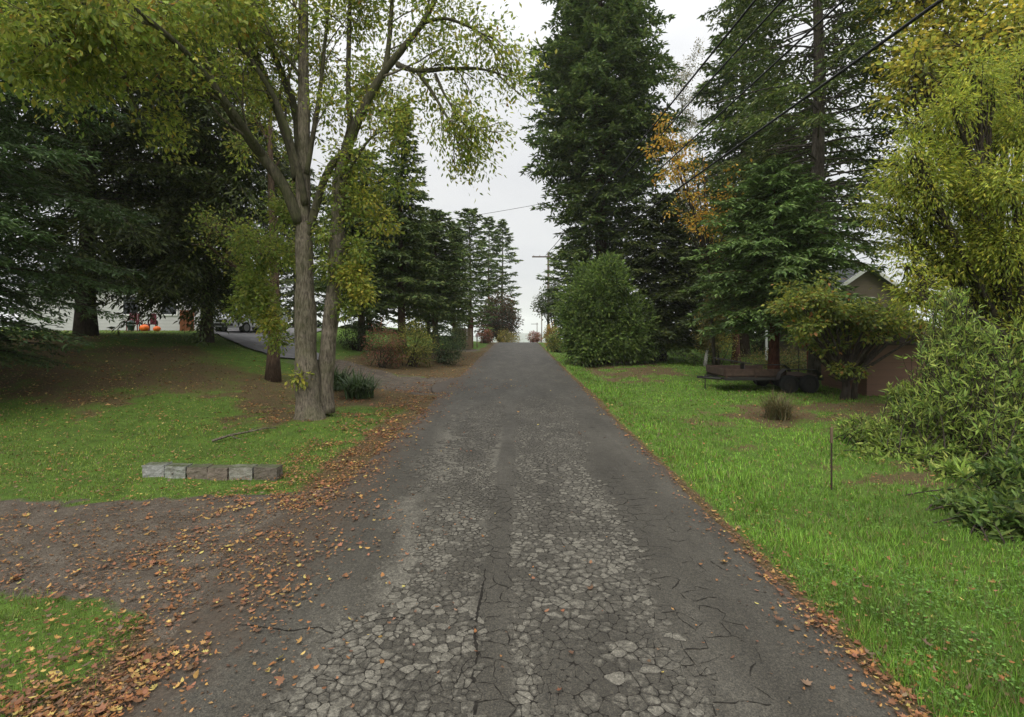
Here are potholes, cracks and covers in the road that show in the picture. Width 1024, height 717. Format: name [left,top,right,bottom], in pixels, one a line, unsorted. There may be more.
crack [242,393,790,717]
